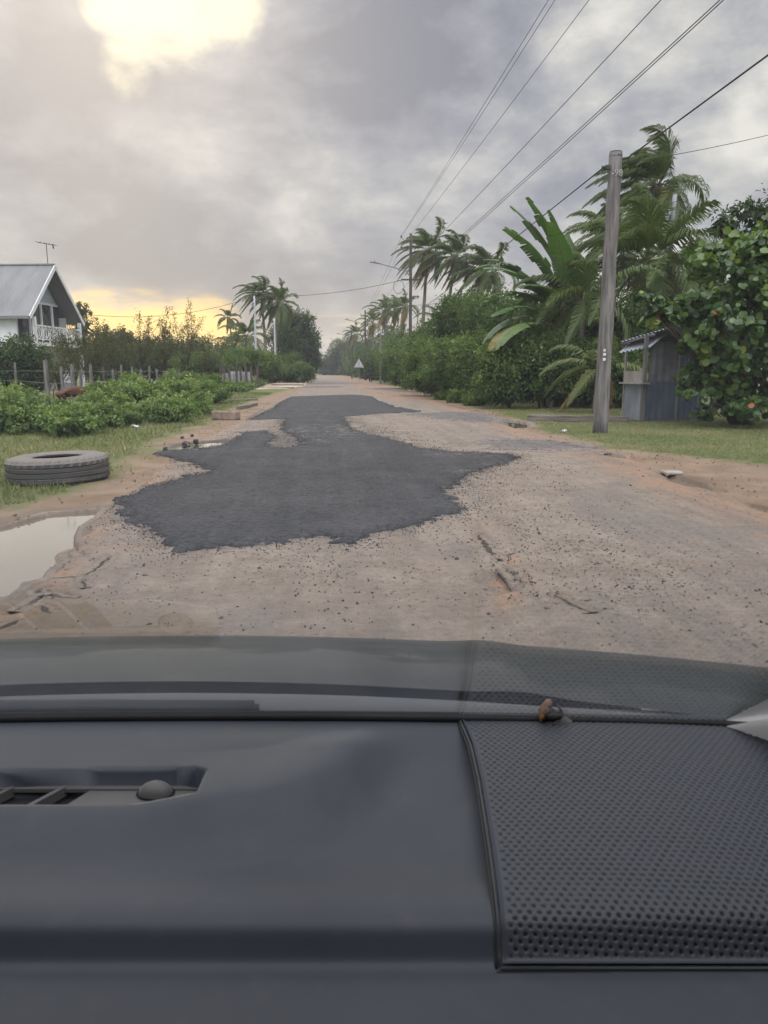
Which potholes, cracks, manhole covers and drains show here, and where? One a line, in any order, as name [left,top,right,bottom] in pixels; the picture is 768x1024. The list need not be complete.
pothole [168,439,233,450]
pothole [0,507,109,602]
pothole [498,418,537,429]
crack [0,555,119,632]
crack [471,535,525,592]
crack [549,594,597,614]
